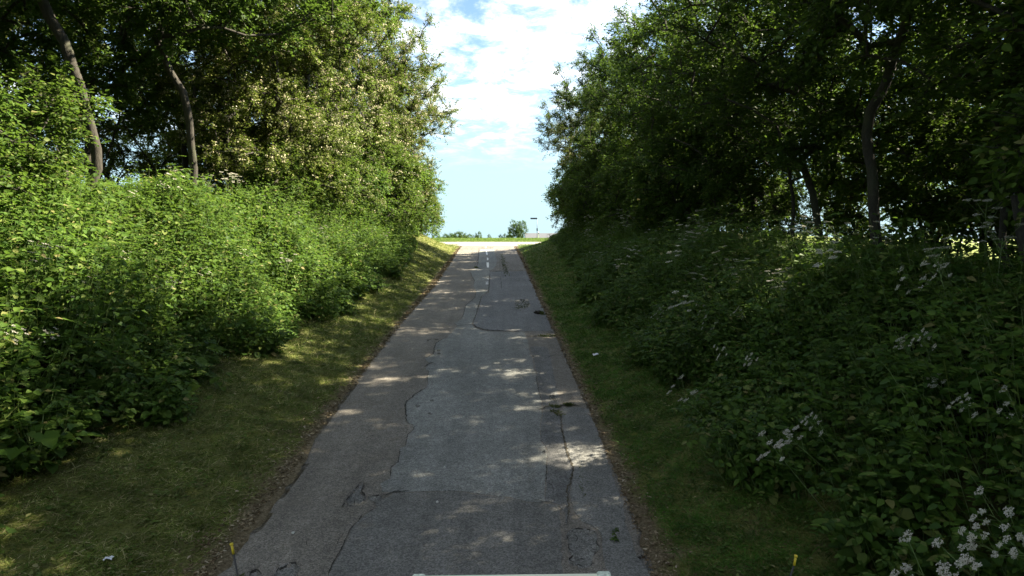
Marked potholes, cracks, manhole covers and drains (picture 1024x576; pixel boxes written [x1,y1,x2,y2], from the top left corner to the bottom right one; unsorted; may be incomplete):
pothole [514,299,530,309]
crack [328,338,444,575]
